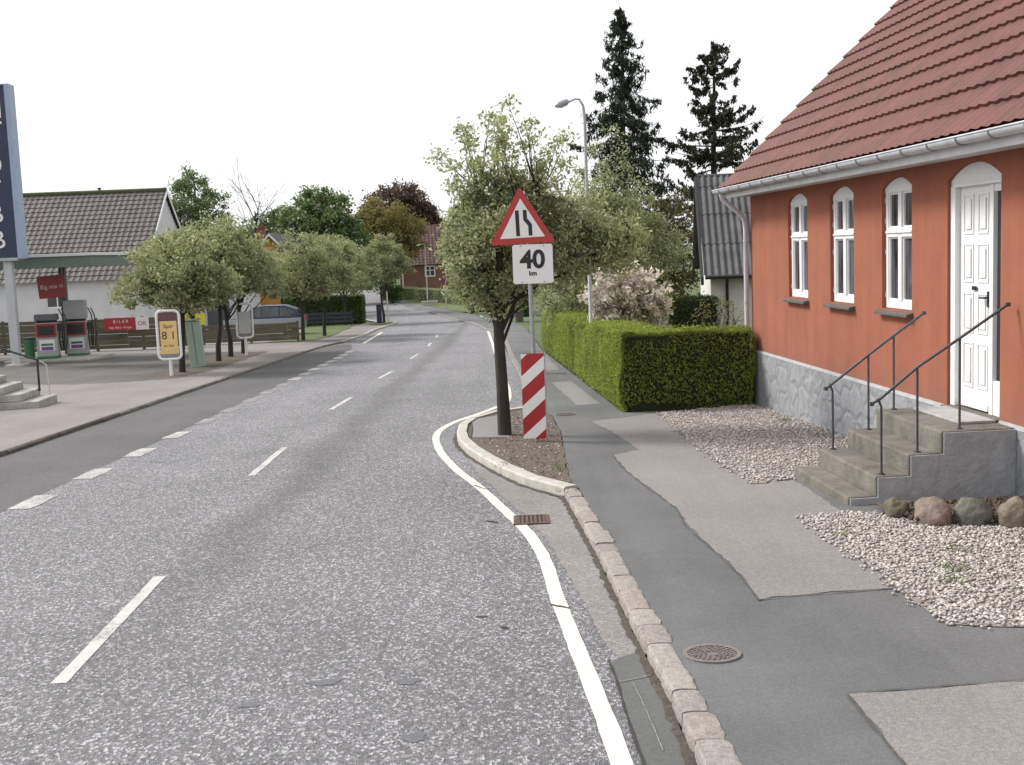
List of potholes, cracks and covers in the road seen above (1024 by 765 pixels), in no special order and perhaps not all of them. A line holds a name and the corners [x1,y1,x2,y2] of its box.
drain grate [513,514,550,526]
manhole cover [683,644,742,664]
